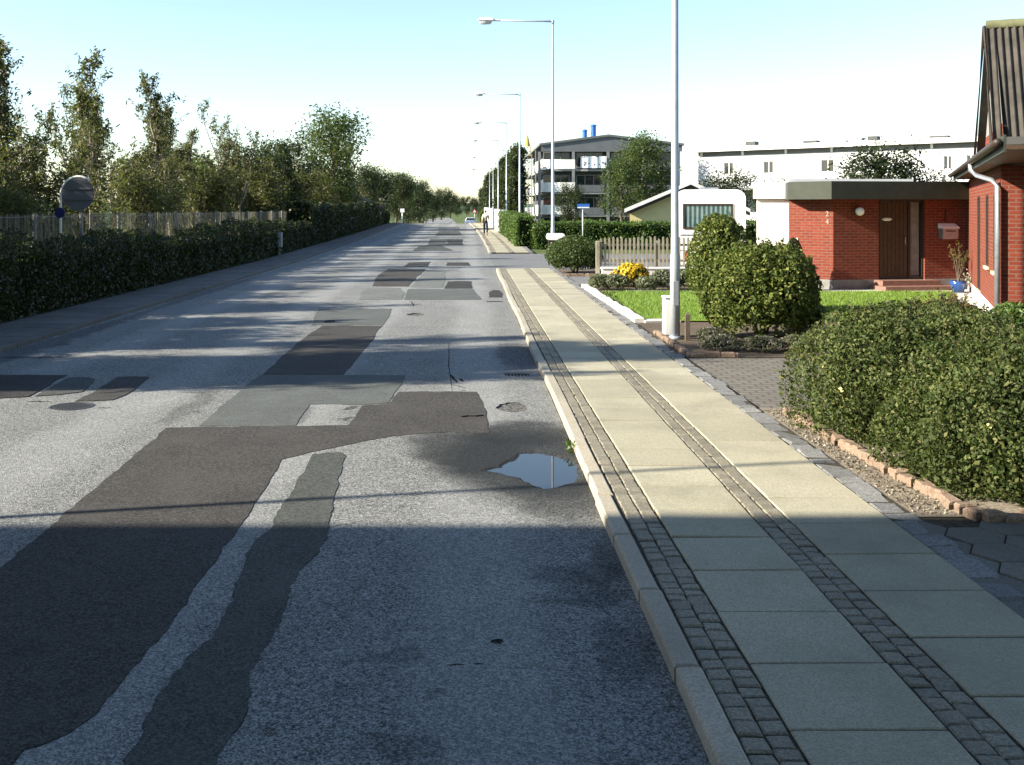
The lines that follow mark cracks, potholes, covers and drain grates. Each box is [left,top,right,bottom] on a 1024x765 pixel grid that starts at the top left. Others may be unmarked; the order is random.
pothole [496,402,527,412]
crack [448,345,465,391]
